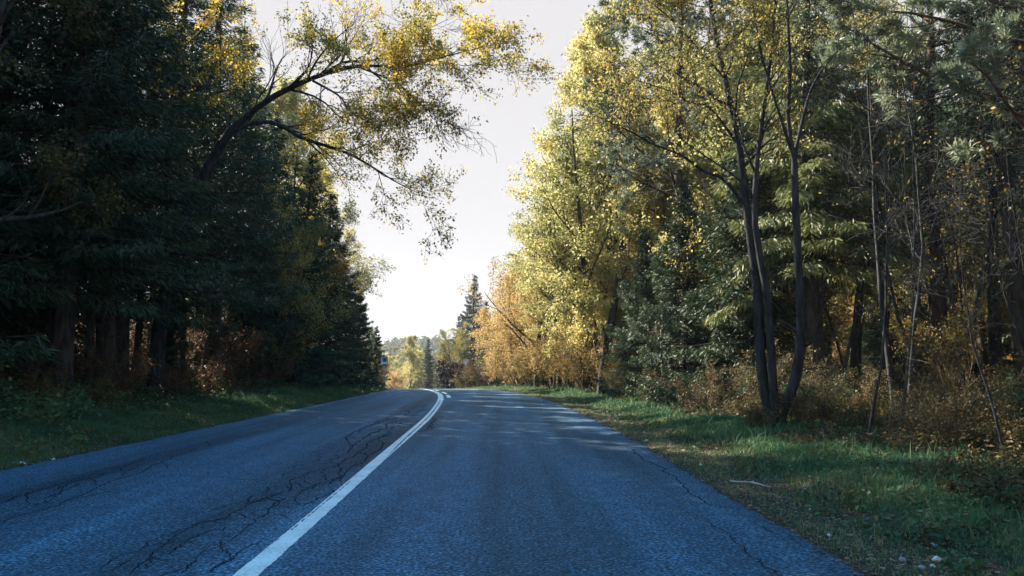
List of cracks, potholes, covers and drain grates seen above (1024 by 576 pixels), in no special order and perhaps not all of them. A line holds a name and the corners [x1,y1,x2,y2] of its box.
crack [631,448,779,576]
crack [0,404,435,576]
